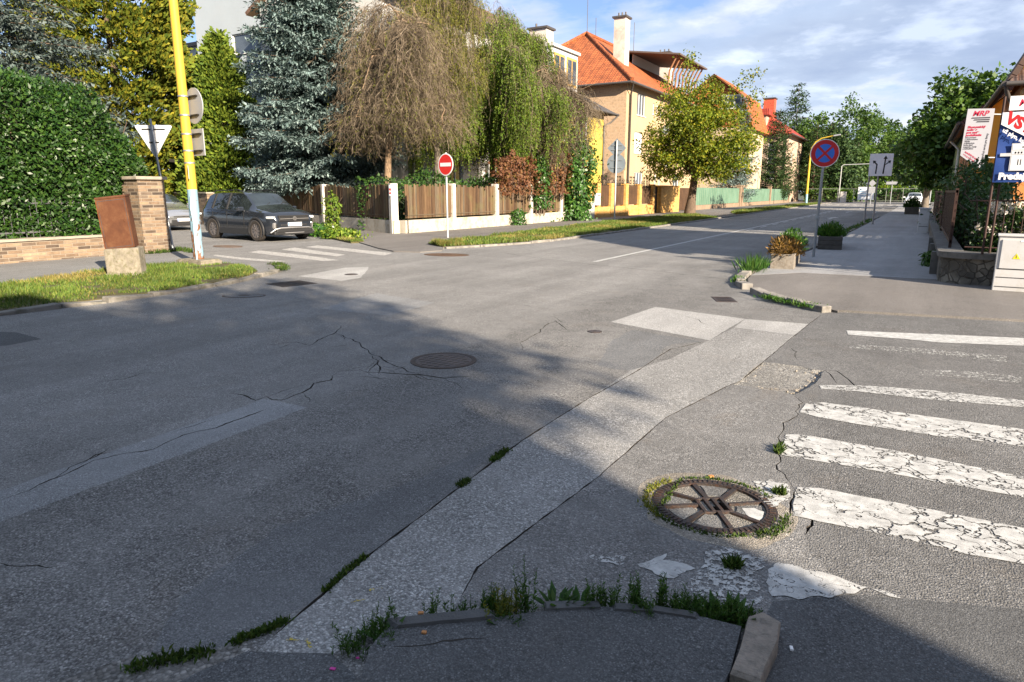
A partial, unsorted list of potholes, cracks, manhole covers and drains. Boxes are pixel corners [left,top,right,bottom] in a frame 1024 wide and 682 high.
manhole cover [410,352,477,369]
crack [2,374,335,500]
crack [272,327,468,388]
manhole cover [652,479,778,534]
crack [775,397,814,535]
